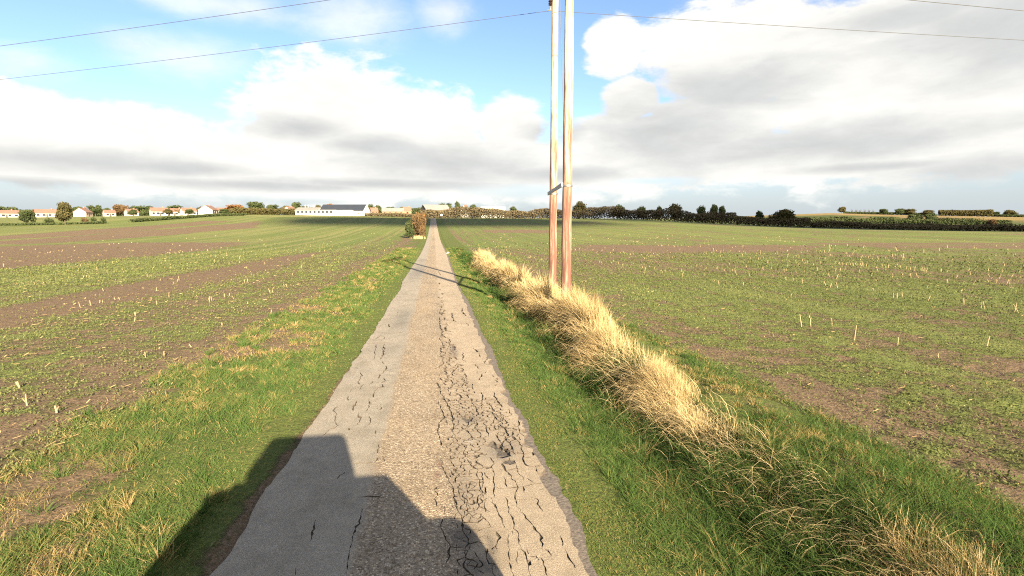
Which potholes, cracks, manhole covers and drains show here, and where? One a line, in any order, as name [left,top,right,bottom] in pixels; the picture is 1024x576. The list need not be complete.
crack [421,260,576,576]
crack [346,496,384,573]
crack [324,312,419,479]
pothole [484,441,511,458]
